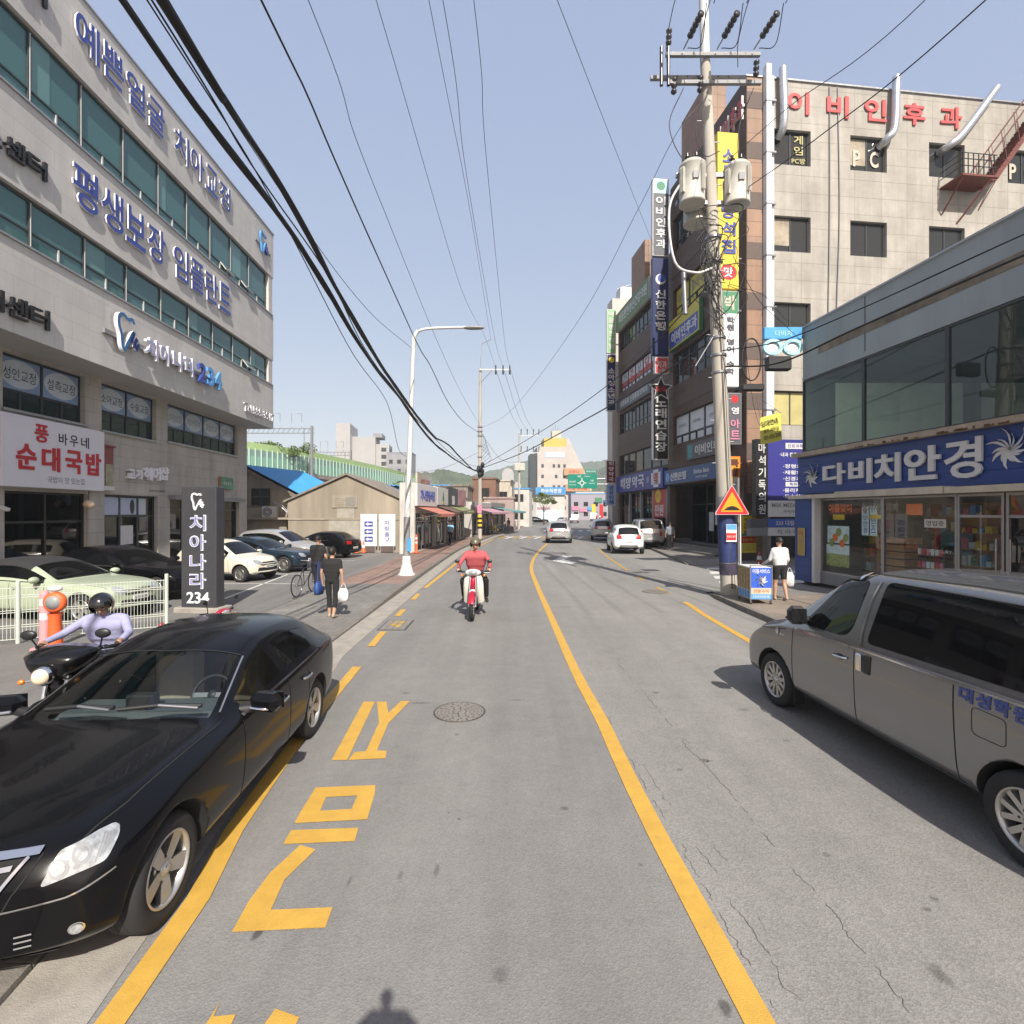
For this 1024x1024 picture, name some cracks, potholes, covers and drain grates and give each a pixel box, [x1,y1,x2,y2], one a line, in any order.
manhole cover [433,702,486,723]
crack [616,660,910,1013]
